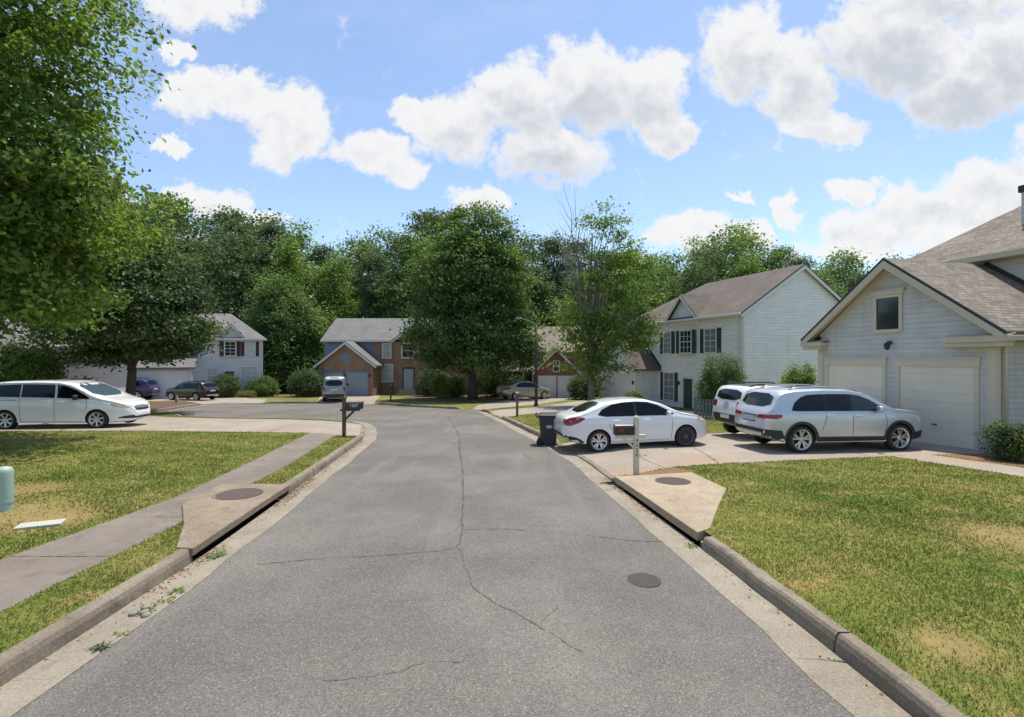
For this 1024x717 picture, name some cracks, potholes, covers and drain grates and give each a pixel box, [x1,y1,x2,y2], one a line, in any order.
manhole cover [655,477,691,485]
manhole cover [627,573,661,588]
drain grate [615,472,727,549]
manhole cover [212,488,263,500]
drain grate [176,484,290,562]
crack [324,660,459,681]
